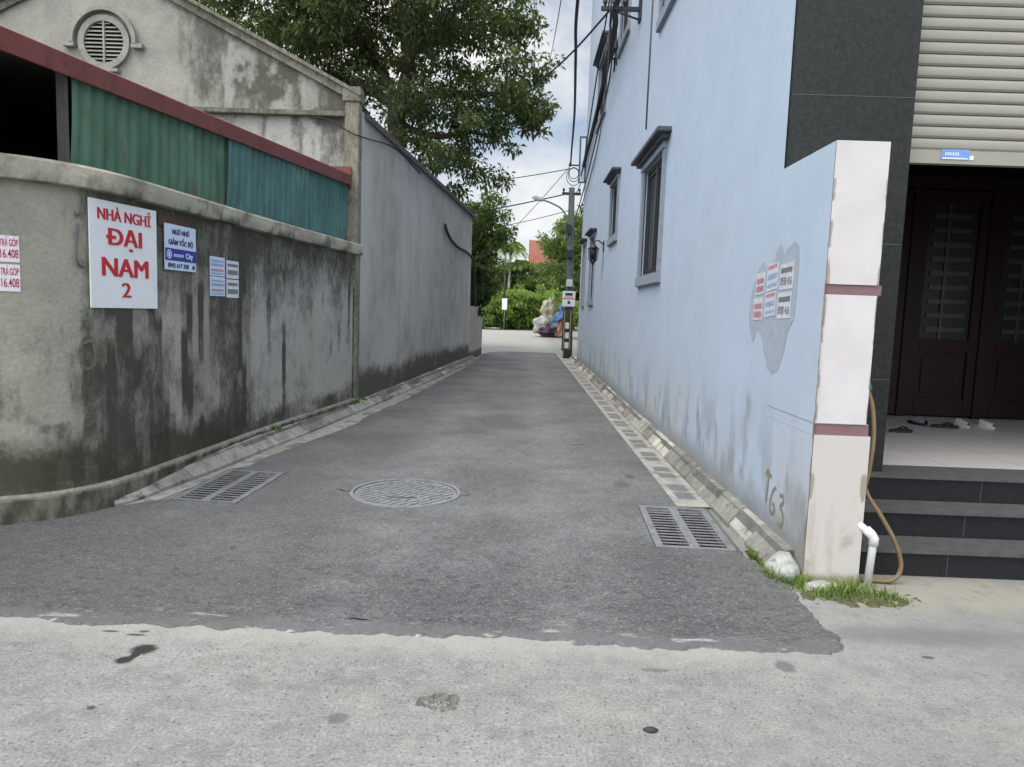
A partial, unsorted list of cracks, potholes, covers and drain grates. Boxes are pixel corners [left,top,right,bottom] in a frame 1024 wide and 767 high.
pothole [415,692,460,713]
drain grate [638,505,737,552]
manhole cover [349,478,461,508]
drain grate [171,469,285,504]
